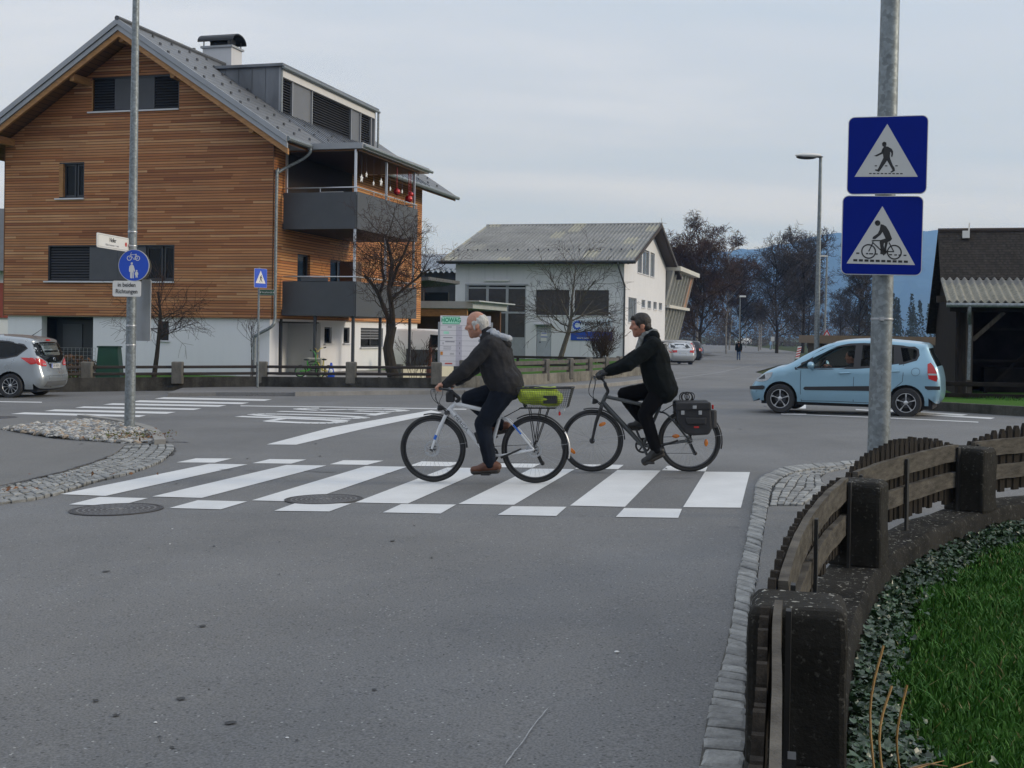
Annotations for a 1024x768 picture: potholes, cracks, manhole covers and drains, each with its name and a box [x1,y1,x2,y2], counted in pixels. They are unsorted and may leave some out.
manhole cover [284,494,363,504]
manhole cover [68,503,164,516]
